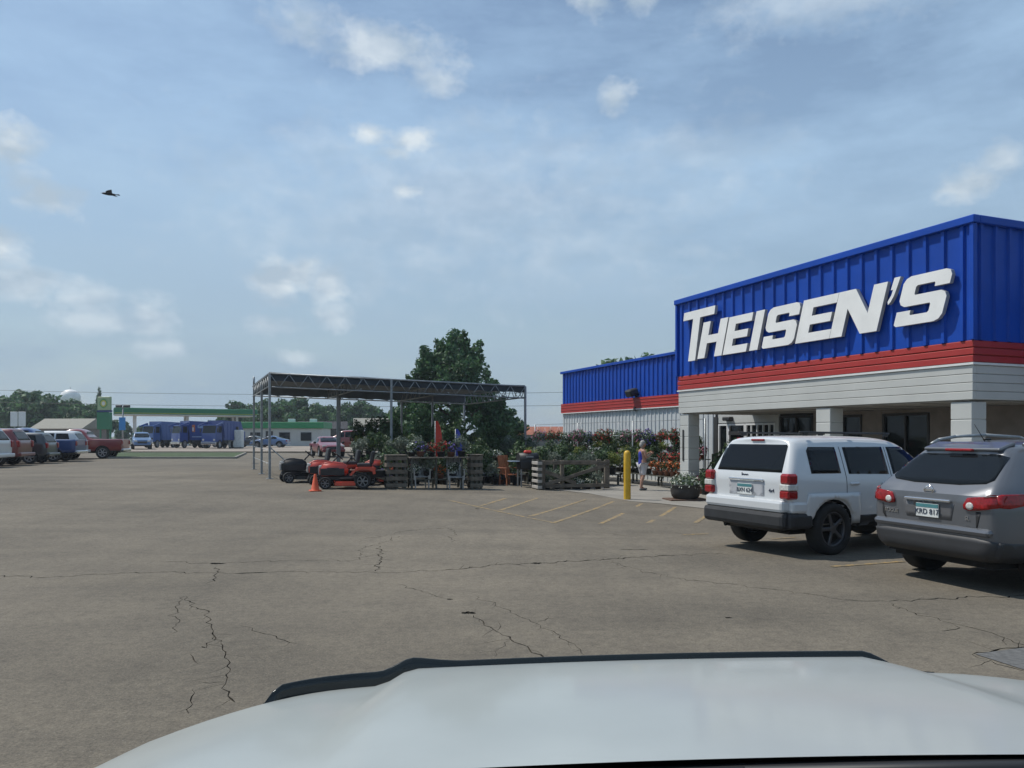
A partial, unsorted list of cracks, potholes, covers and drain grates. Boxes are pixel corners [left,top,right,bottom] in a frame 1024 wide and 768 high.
crack [3,528,1024,671]
crack [167,596,243,714]
